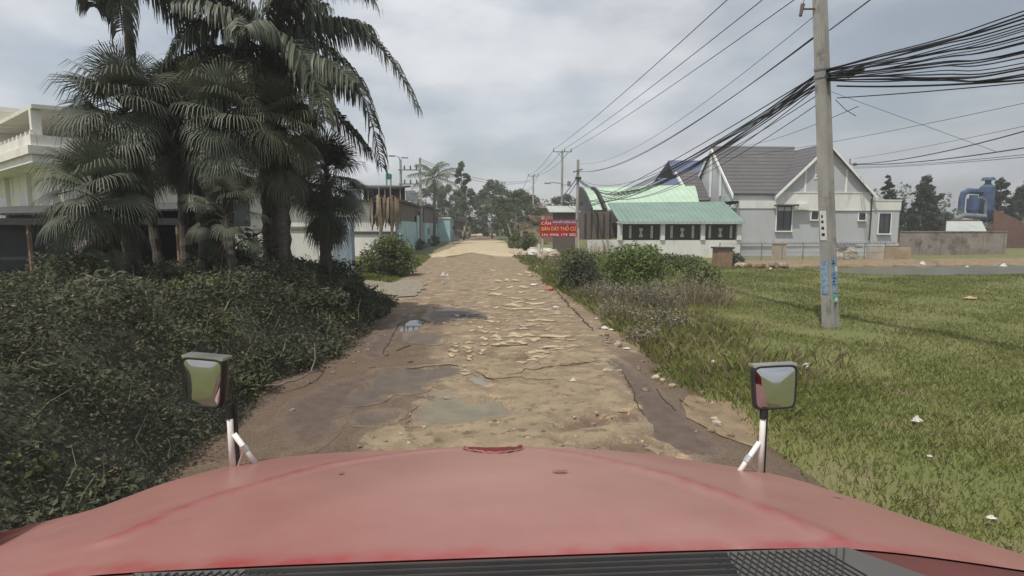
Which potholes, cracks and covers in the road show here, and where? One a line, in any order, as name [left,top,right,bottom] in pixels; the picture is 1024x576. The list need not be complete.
crack [383,279,601,380]
crack [622,371,693,415]
